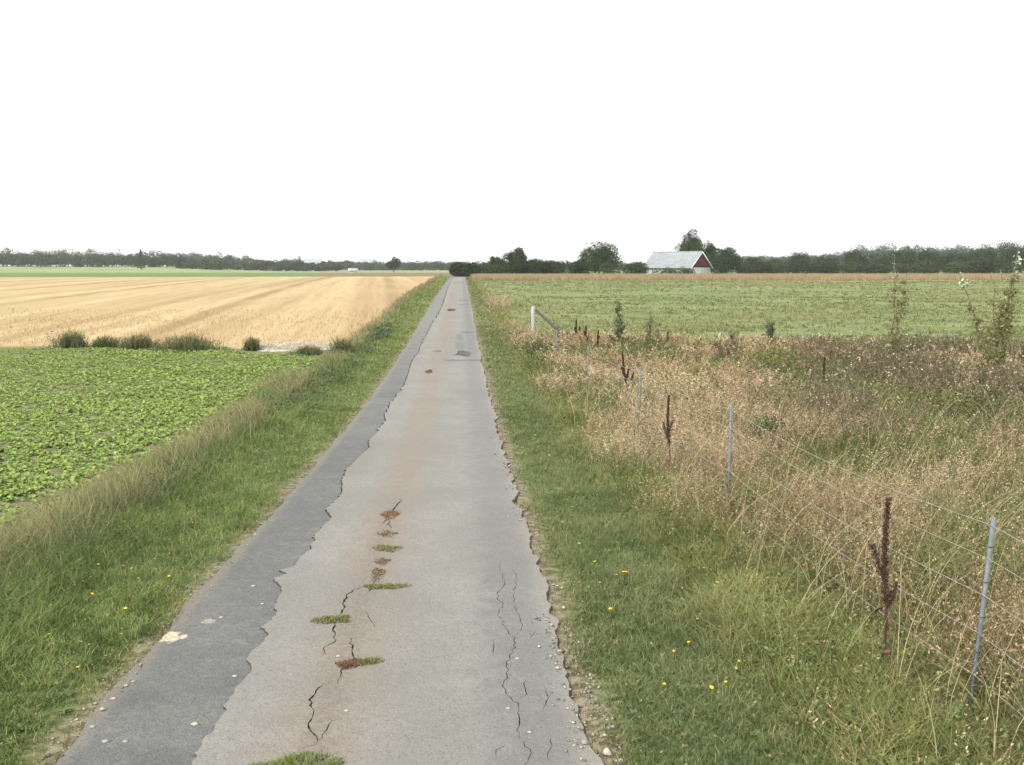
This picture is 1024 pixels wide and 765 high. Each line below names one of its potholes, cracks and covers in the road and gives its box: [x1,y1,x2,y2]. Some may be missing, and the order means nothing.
crack [191,277,454,765]
crack [493,569,552,763]
